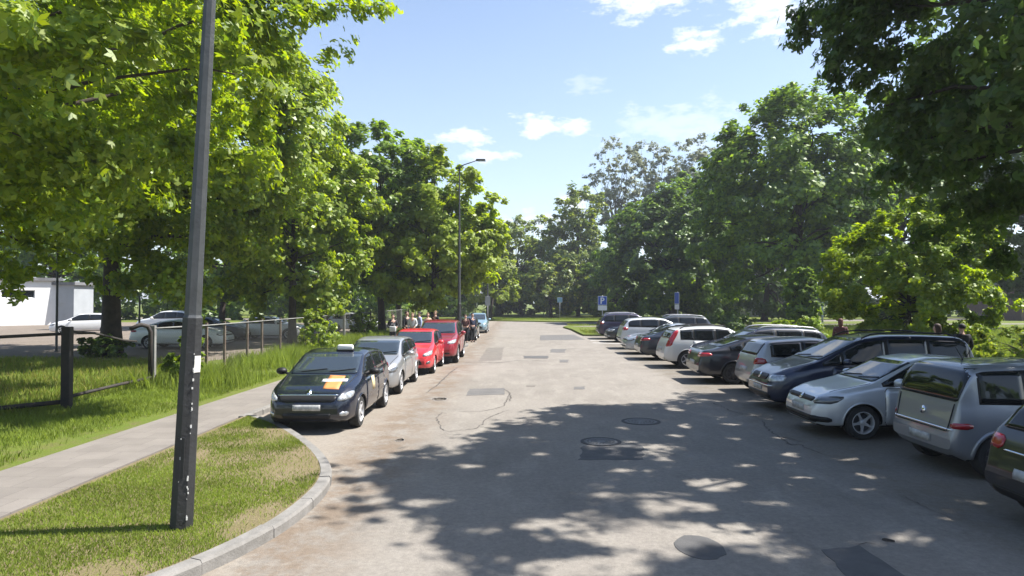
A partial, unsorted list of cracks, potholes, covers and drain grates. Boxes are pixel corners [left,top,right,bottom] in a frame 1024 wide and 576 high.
crack [762,421,822,454]
manhole cover [580,437,621,446]
crack [436,389,512,431]
